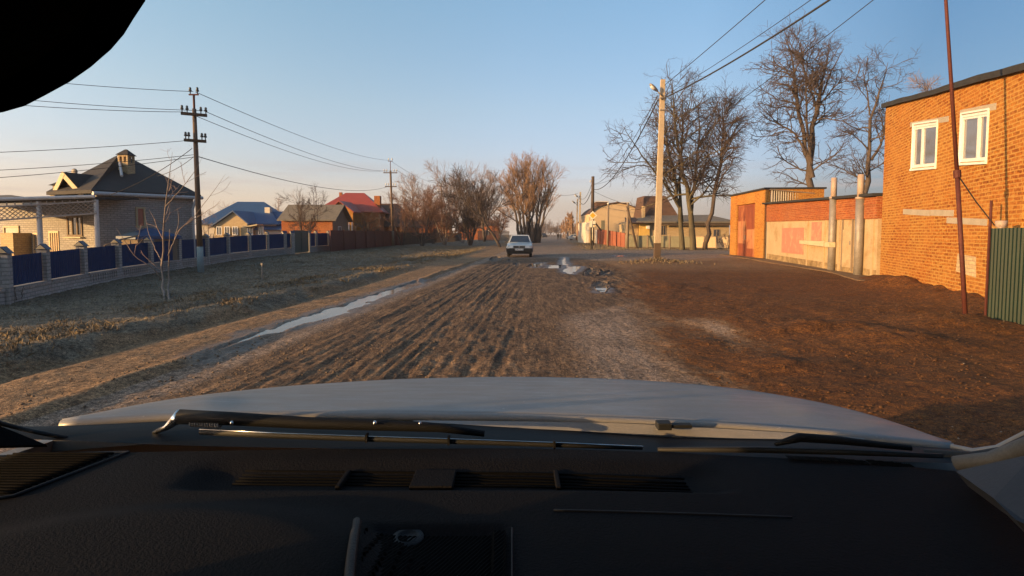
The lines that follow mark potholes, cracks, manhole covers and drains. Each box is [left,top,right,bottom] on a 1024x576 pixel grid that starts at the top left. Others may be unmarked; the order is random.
pothole [589,280,611,293]
